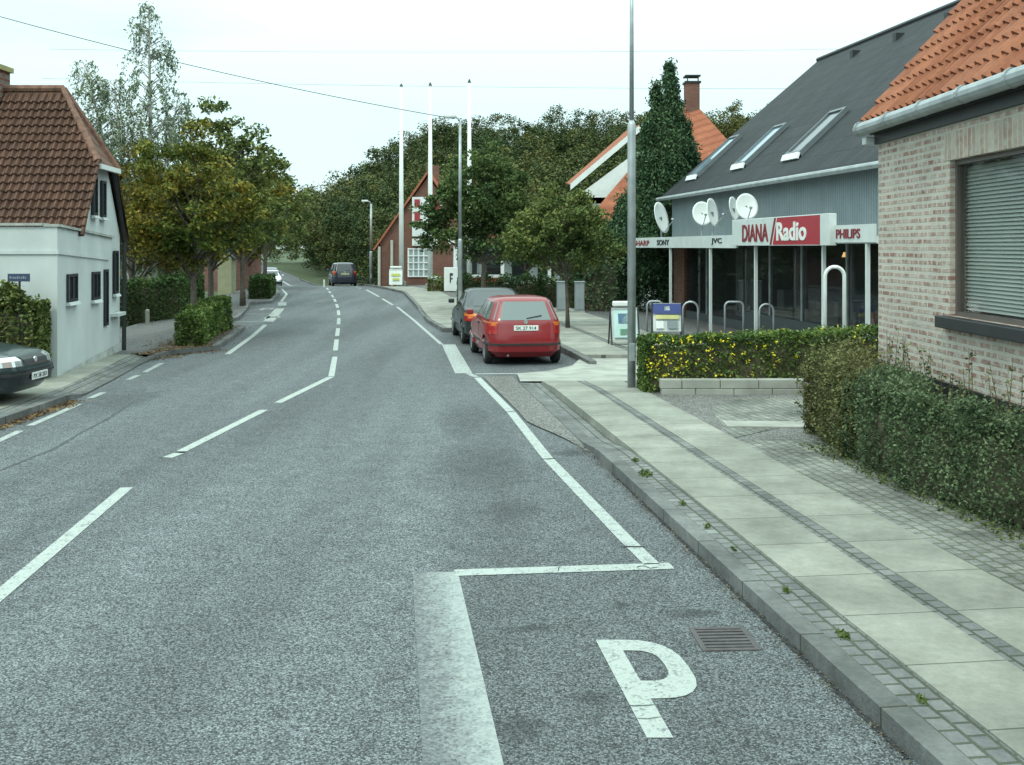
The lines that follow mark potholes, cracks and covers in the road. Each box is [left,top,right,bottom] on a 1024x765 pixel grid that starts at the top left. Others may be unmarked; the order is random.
drain grate [689,626,762,652]
